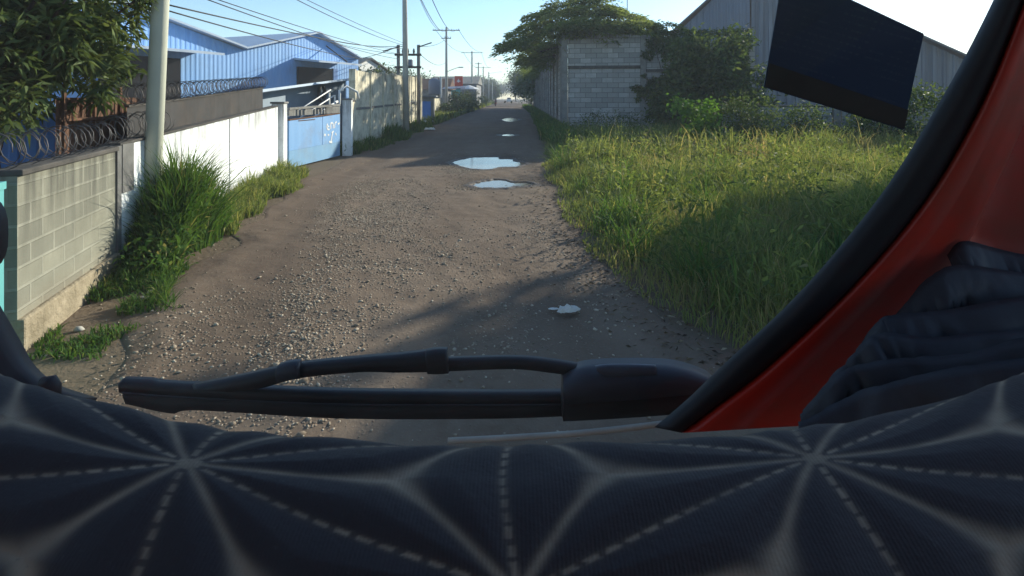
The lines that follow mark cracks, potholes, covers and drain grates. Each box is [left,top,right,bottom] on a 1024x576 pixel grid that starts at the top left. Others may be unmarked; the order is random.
pothole [463,178,543,189]
pothole [445,156,531,170]
